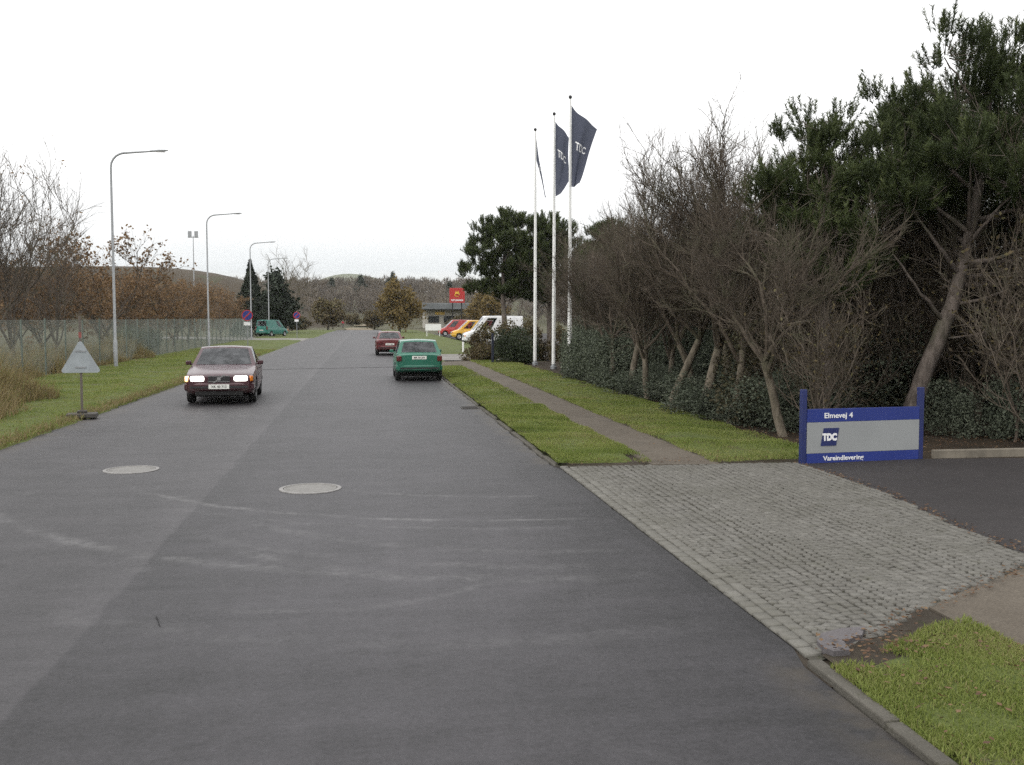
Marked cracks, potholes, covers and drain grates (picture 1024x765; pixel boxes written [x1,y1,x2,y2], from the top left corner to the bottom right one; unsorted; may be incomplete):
manhole cover [279,483,342,494]
manhole cover [102,465,160,474]
